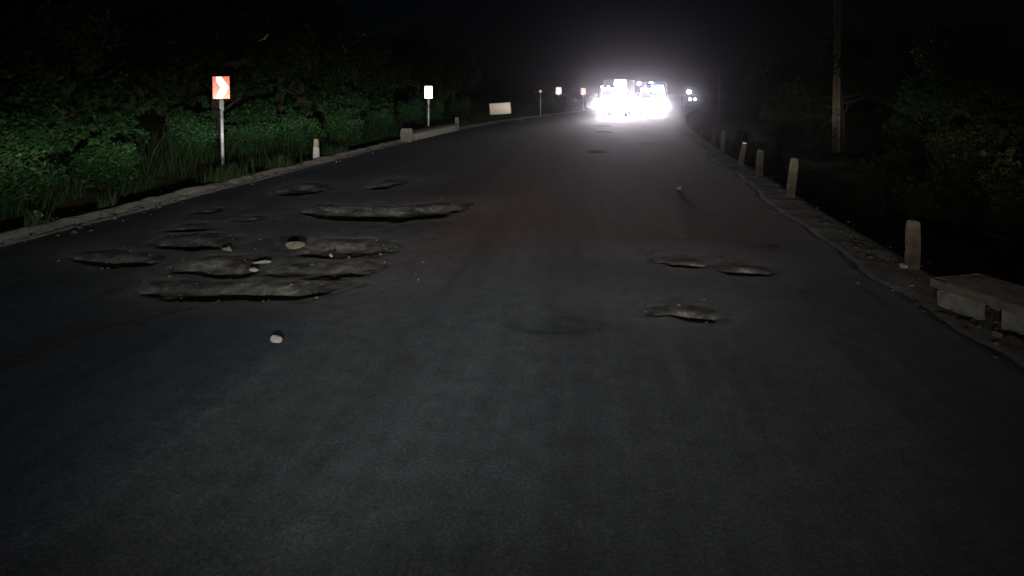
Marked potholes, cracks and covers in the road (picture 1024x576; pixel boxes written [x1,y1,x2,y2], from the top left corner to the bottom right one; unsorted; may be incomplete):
pothole [146,233,246,251]
pothole [228,215,267,223]
pothole [63,249,166,270]
pothole [645,303,729,324]
pothole [167,255,263,280]
pothole [362,178,409,190]
pothole [649,257,709,269]
pothole [269,182,331,196]
pothole [712,264,780,277]
pothole [296,202,474,223]
pothole [138,279,366,302]
pothole [261,260,390,281]
